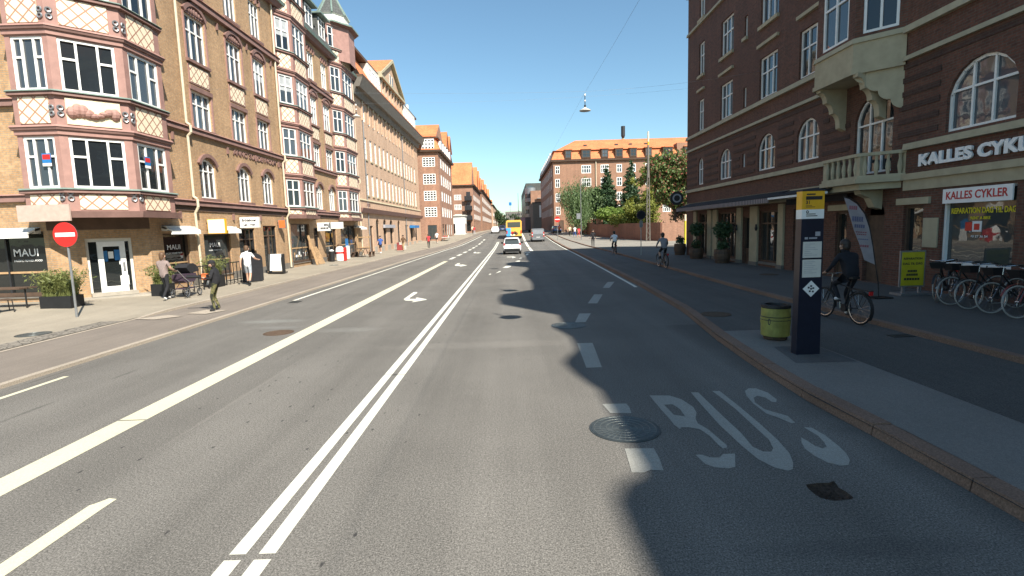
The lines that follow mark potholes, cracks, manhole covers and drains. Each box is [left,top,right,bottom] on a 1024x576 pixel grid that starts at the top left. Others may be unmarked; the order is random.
manhole cover [589,416,661,443]
pothole [806,481,853,501]
